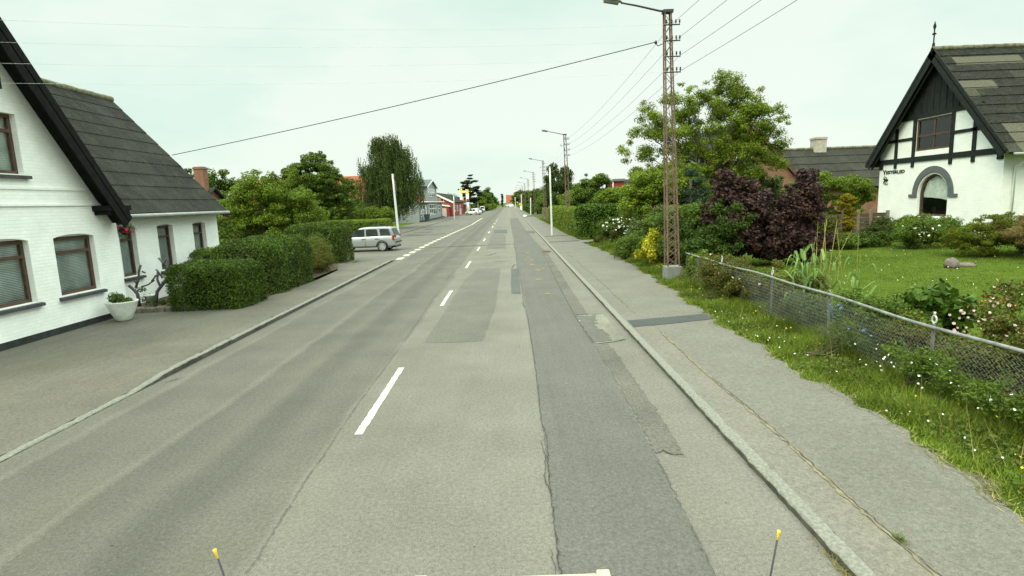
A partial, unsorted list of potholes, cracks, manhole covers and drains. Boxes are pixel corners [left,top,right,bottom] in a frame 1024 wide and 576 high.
crack [527,232,942,576]
crack [512,232,562,575]
